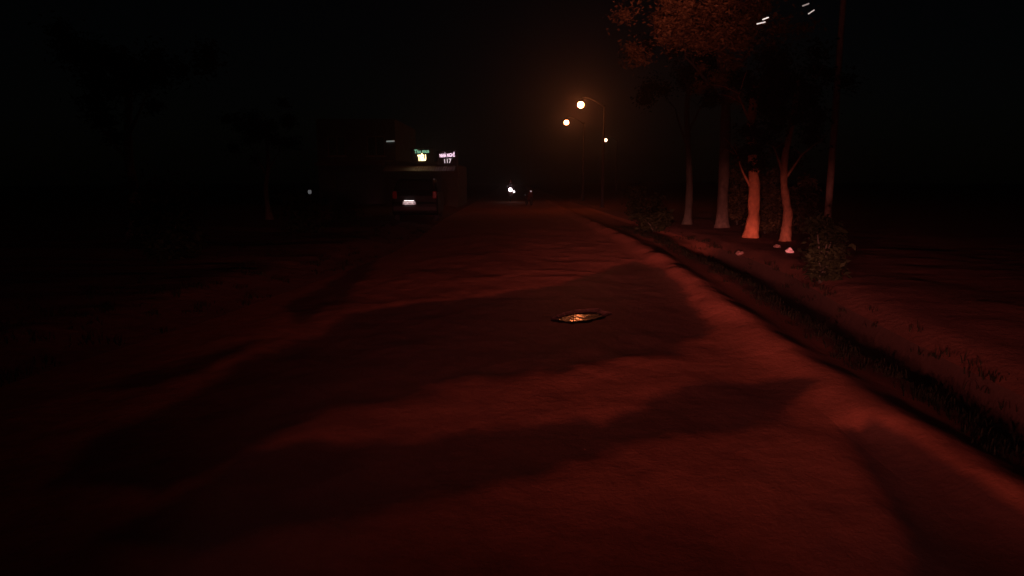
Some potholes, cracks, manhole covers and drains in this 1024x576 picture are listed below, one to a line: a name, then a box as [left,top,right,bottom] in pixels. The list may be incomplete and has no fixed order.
pothole [550,308,612,325]
